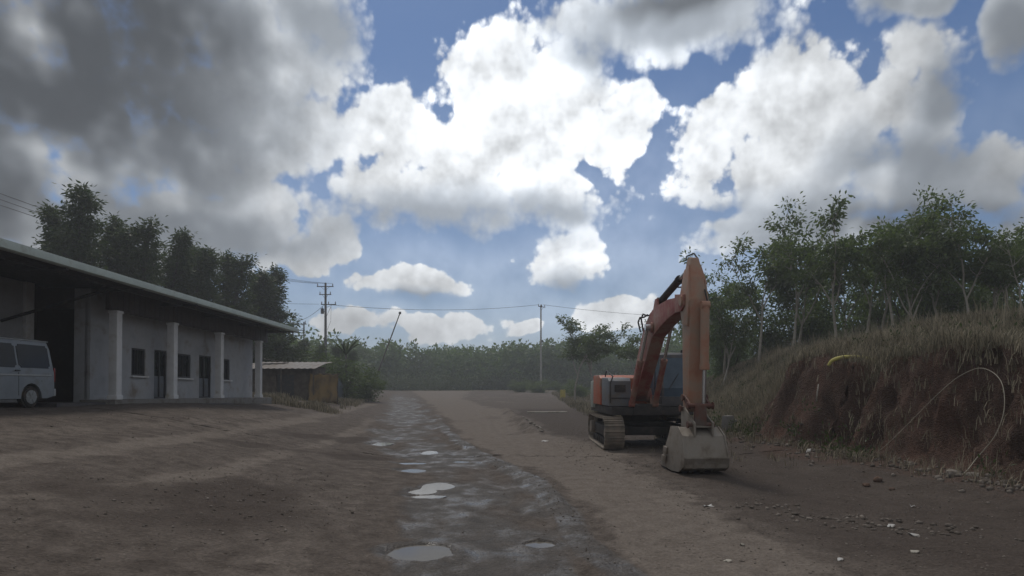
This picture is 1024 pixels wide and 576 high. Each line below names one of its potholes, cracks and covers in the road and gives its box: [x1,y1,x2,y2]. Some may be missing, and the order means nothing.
pothole [379,479,476,506]
pothole [382,467,440,475]
pothole [351,440,407,449]
